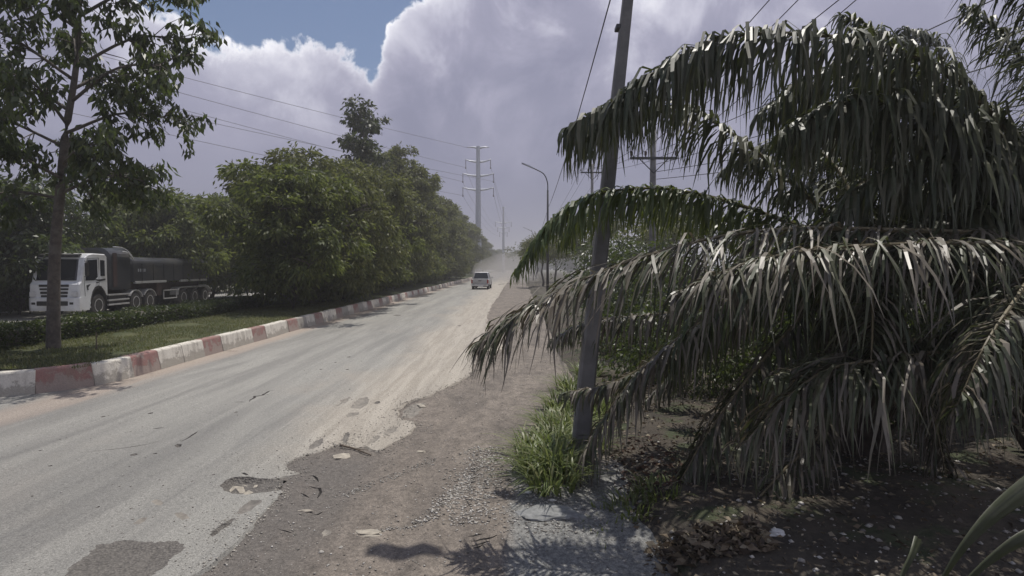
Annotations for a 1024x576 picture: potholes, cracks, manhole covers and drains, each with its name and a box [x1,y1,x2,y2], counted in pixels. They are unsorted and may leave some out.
pothole [351,397,369,409]
pothole [236,500,262,514]
pothole [220,476,284,495]
